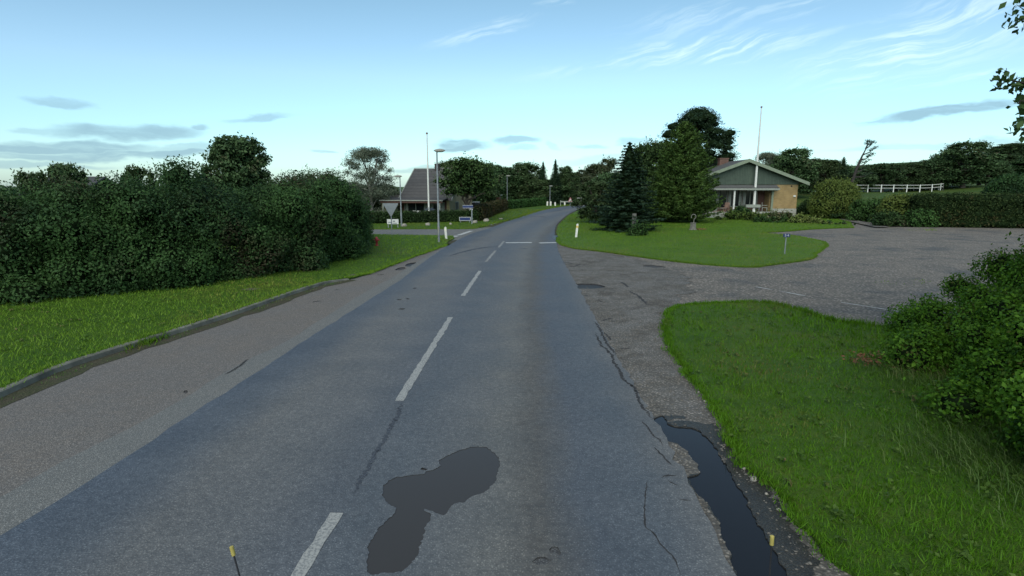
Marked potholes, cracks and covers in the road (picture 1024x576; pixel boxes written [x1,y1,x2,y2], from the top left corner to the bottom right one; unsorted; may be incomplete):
crack [584,295,685,571]
pothole [654,416,787,576]
pothole [532,557,551,565]
